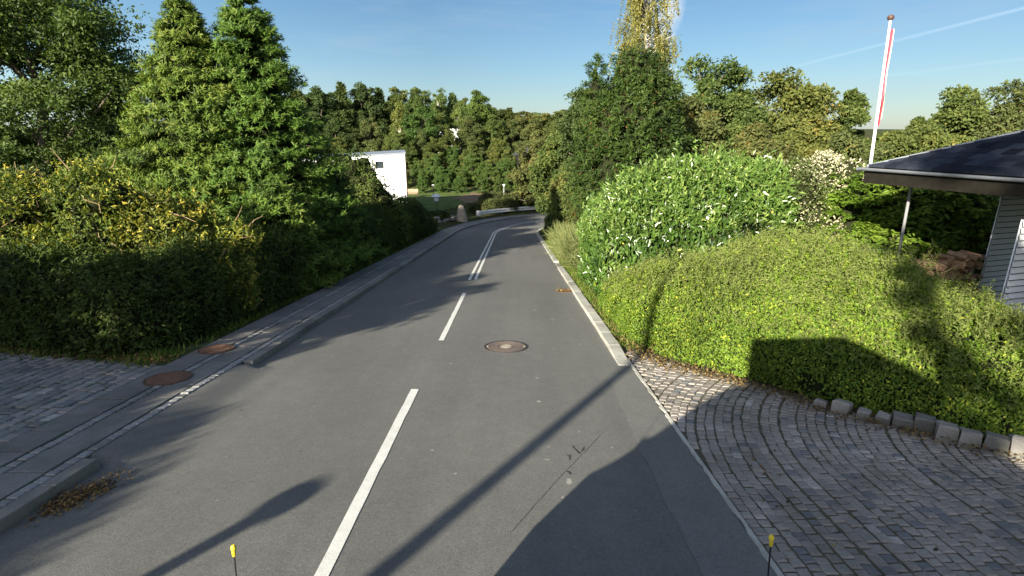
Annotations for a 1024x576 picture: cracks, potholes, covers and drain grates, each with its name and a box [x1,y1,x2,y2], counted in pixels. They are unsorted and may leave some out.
manhole cover [142,371,193,387]
crack [510,434,601,533]
manhole cover [197,344,236,355]
manhole cover [484,340,528,353]
